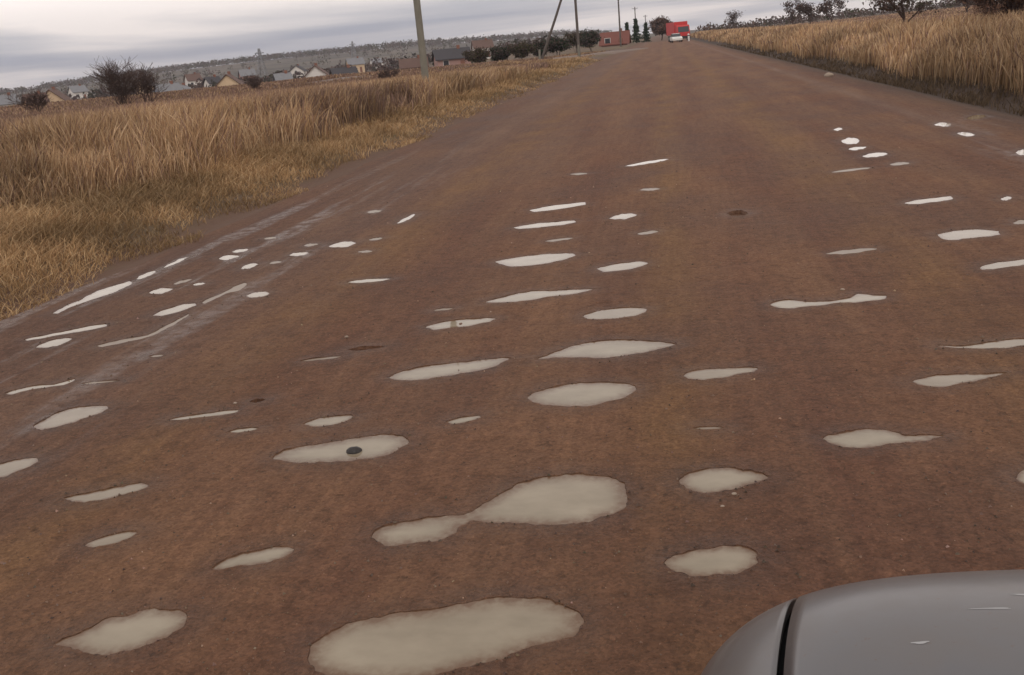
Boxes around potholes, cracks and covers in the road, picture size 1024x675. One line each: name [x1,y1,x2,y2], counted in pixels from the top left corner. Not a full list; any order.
pothole [663,544,759,576]
pothole [770,293,887,308]
pothole [371,472,628,546]
pothole [527,381,636,407]
pothole [307,596,585,675]
pothole [273,433,410,463]
pothole [212,546,295,570]
pothole [683,366,758,380]
pothole [55,607,188,655]
pothole [84,530,138,547]
pothole [64,482,148,502]
pothole [33,405,109,430]
